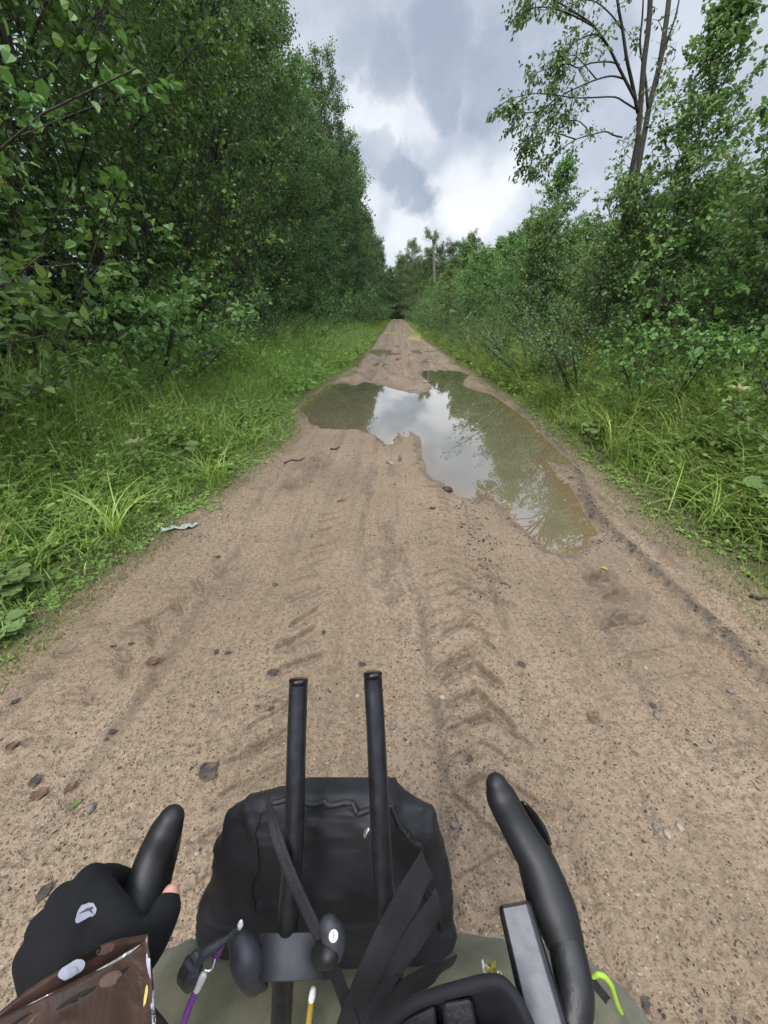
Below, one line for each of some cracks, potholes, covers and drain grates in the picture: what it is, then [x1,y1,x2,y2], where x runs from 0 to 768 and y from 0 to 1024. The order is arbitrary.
pothole [297,368,600,557]
